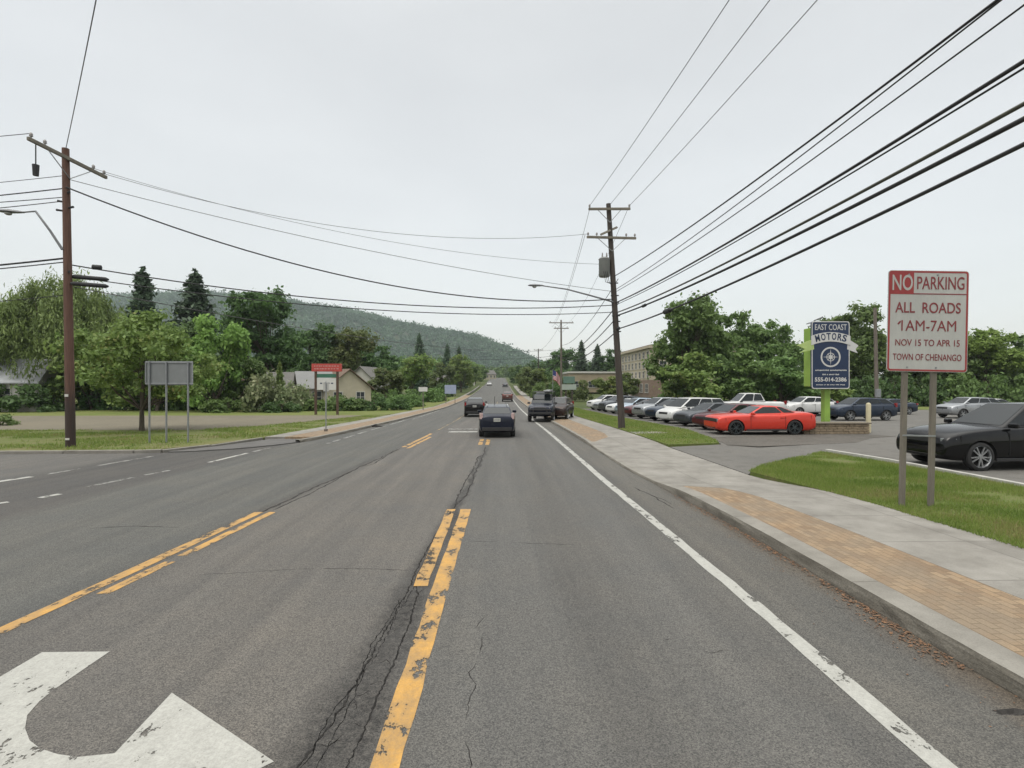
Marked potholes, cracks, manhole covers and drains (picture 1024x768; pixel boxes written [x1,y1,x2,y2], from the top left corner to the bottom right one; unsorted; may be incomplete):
crack [201,447,486,768]
